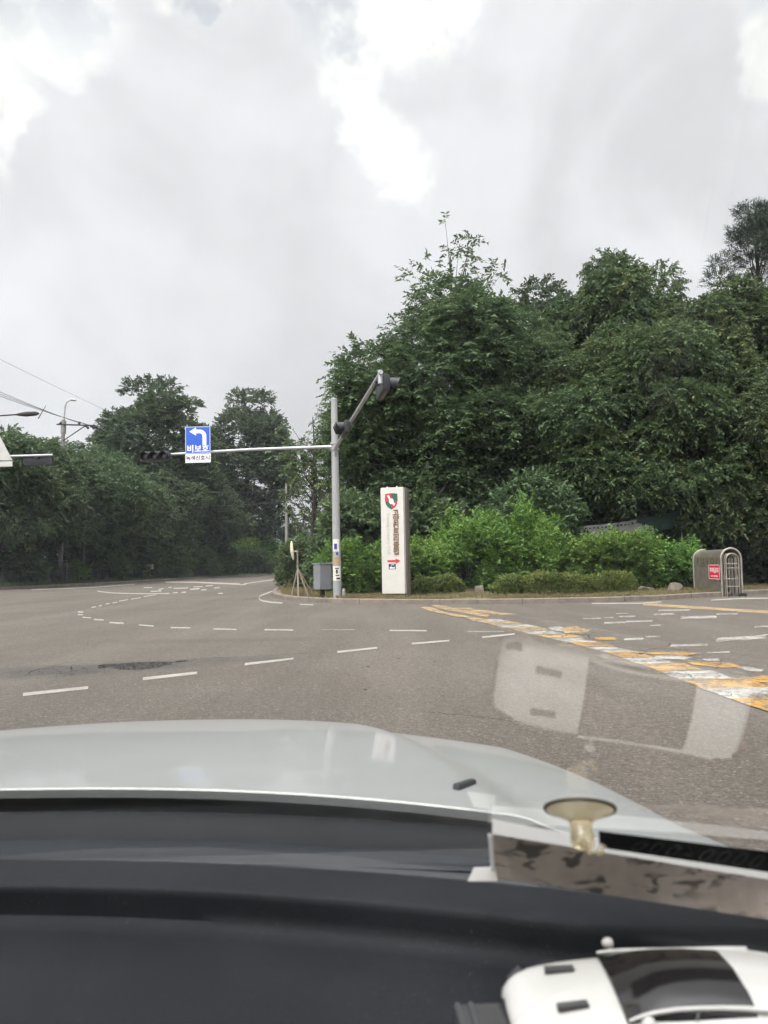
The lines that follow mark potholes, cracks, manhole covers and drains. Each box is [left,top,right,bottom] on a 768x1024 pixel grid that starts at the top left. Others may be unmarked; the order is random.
crack [10,661,105,678]
pothole [97,662,173,670]
